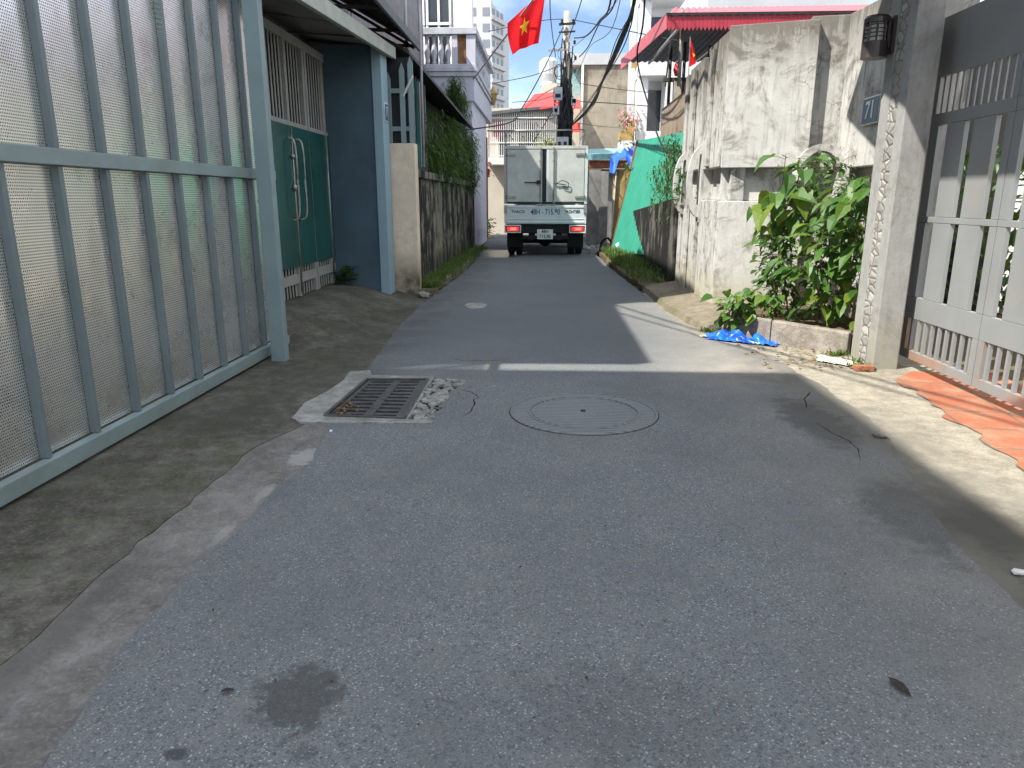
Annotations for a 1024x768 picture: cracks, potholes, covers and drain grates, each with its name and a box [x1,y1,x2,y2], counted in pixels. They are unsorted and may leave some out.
drain grate [292,370,435,425]
crack [804,392,860,458]
manhole cover [509,392,659,436]
